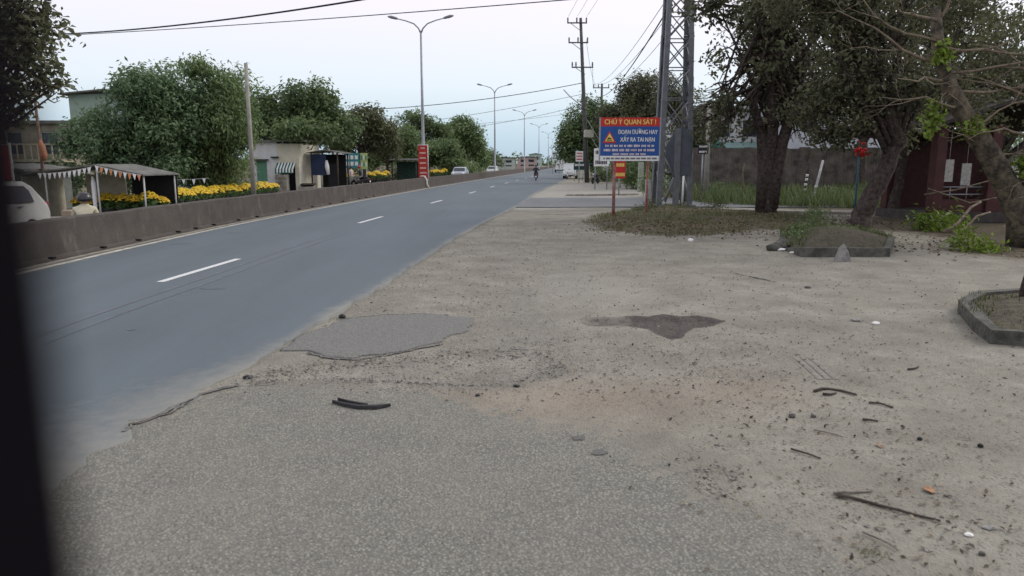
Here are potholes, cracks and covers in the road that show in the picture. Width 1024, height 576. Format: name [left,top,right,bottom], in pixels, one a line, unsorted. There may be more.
pothole [577,314,726,340]
crack [122,384,262,431]
